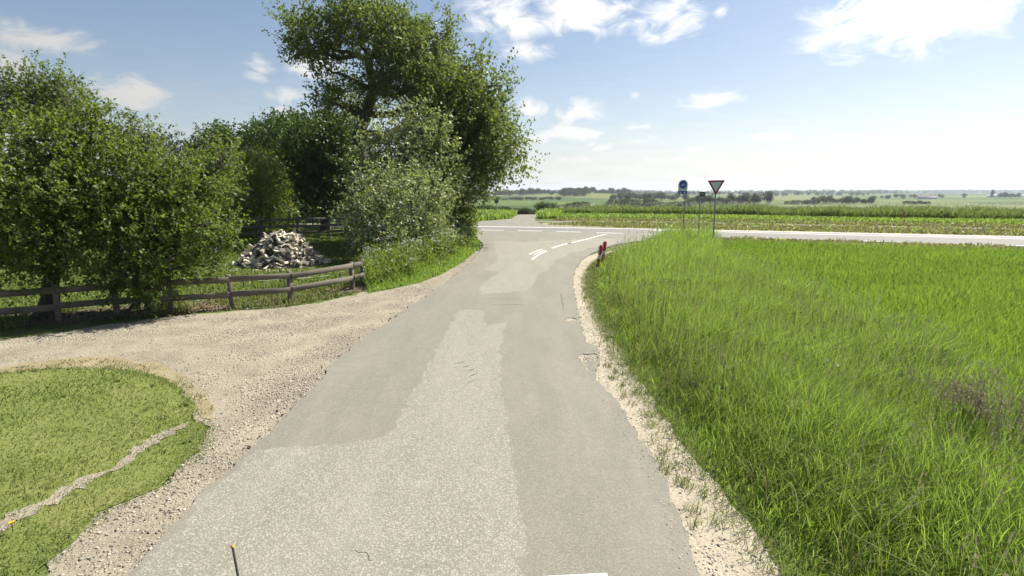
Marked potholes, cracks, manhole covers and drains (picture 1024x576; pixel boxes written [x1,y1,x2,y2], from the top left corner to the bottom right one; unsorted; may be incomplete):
pothole [579,353,599,362]
